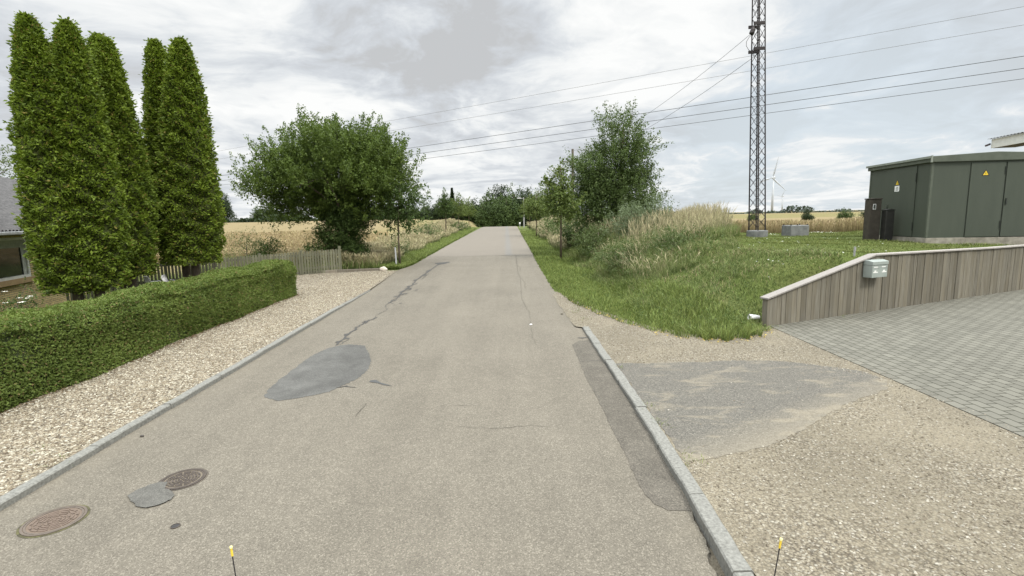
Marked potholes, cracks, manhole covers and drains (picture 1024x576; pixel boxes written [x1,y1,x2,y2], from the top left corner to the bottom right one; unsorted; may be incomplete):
manhole cover [159,468,209,491]
crack [335,264,439,345]
manhole cover [16,505,90,538]
